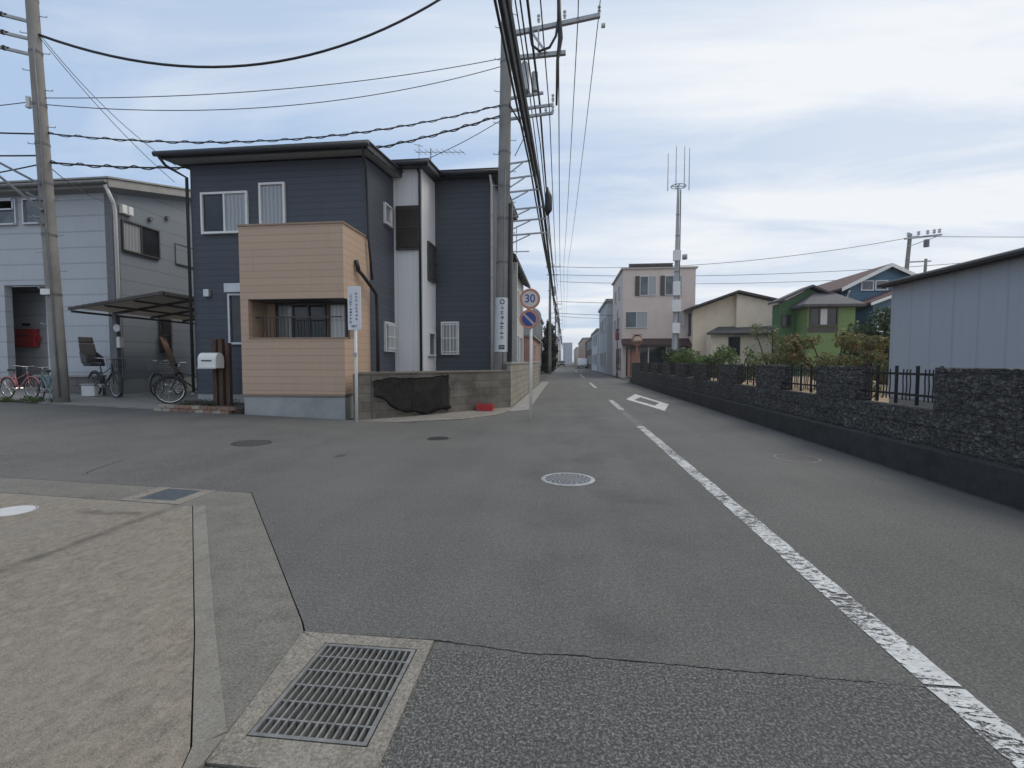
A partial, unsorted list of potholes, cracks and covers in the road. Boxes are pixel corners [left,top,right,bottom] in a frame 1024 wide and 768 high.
drain grate [206,631,434,768]
manhole cover [541,473,595,486]
manhole cover [773,454,822,463]
manhole cover [0,505,39,517]
